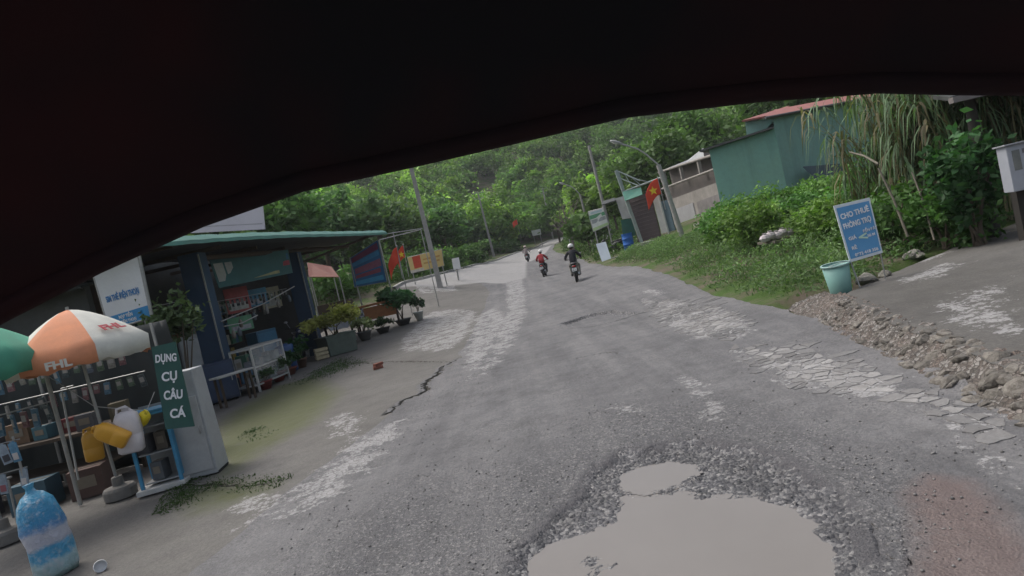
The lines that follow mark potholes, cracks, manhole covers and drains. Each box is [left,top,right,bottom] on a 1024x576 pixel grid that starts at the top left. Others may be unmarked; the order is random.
crack [642,296,1024,454]
crack [342,358,486,413]
pothole [490,434,912,576]
